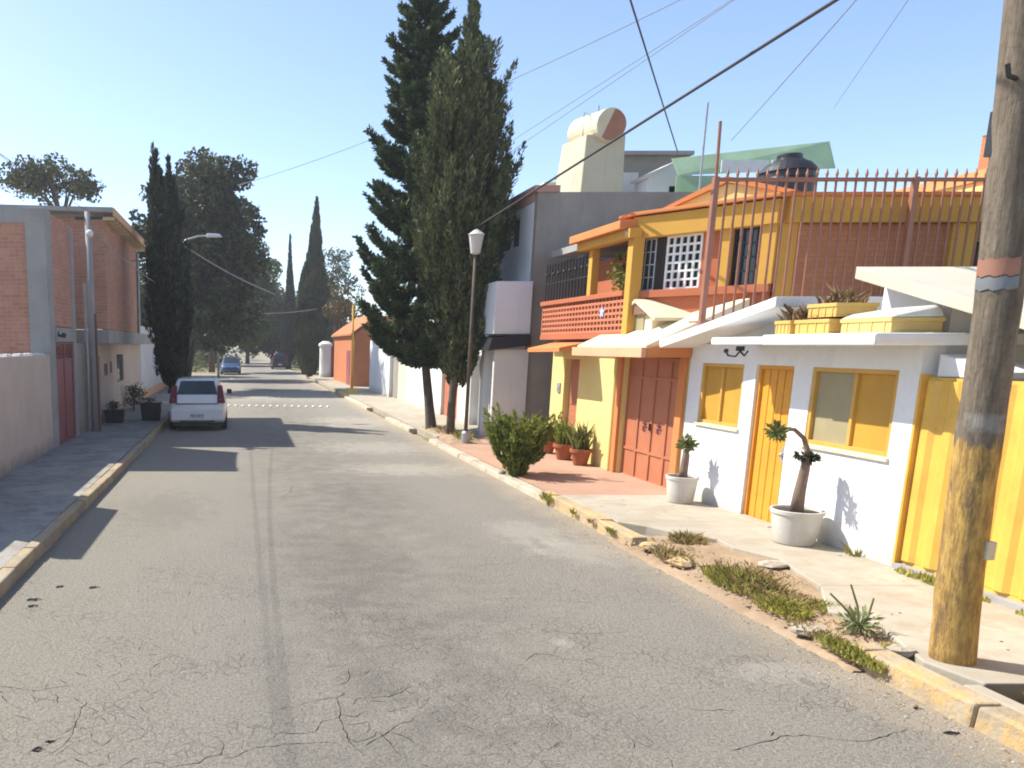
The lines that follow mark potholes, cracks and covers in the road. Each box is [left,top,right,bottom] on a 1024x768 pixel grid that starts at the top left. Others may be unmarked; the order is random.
crack [242,670,413,756]
crack [1,580,249,761]
